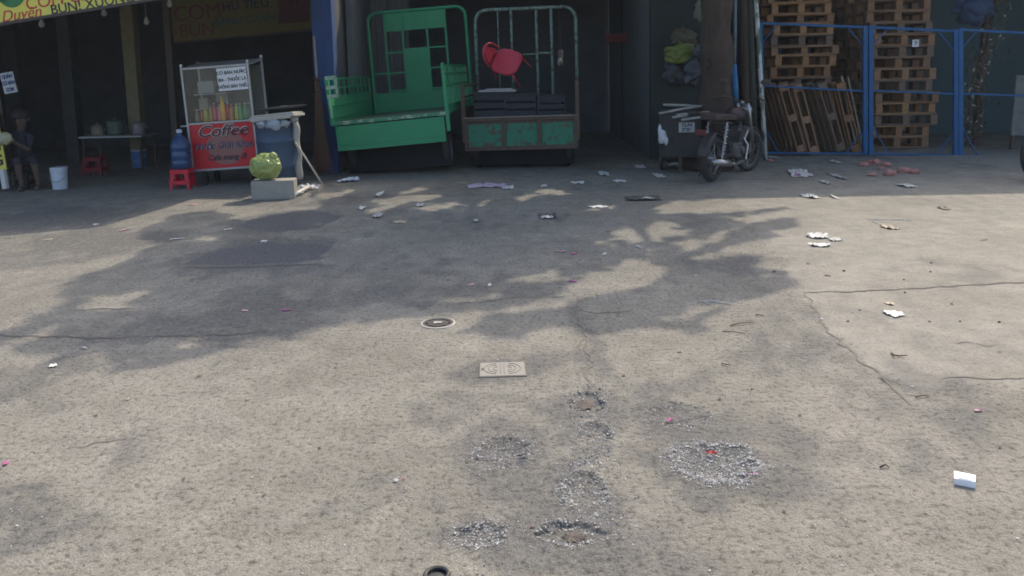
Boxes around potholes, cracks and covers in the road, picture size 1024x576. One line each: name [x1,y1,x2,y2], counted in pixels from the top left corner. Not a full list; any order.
pothole [539,463,626,516]
pothole [654,437,778,494]
manhole cover [478,361,527,378]
pothole [458,431,546,479]
crack [0,331,263,339]
crack [803,282,1024,406]
pothole [564,416,627,450]
pothole [553,387,621,418]
crack [452,291,625,387]
manhole cover [420,317,455,329]
pothole [432,513,524,560]
pothole [519,512,633,559]
